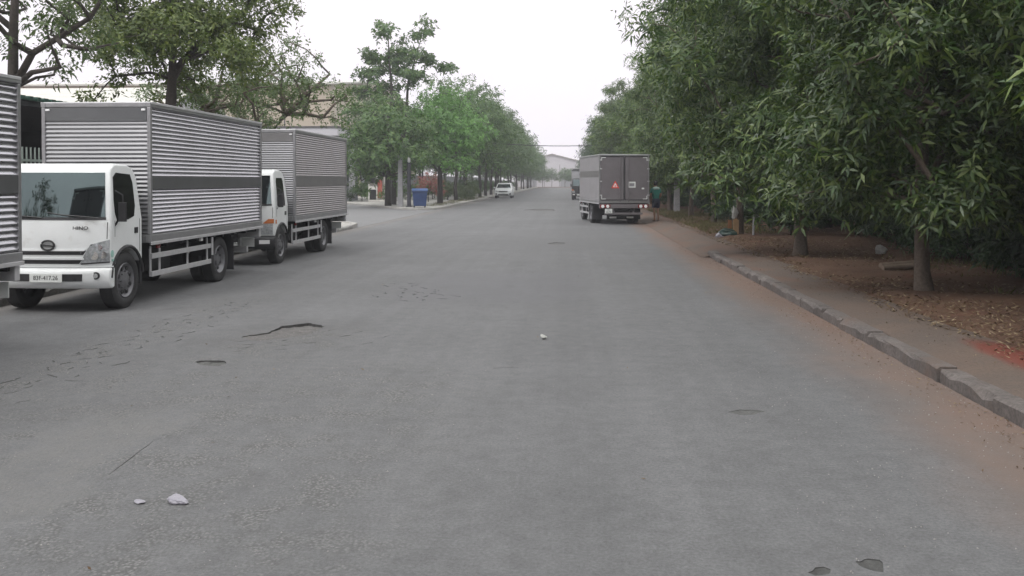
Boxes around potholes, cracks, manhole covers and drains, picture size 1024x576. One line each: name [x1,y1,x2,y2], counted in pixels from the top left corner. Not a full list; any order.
crack [0,300,263,404]
pothole [855,559,884,572]
crack [378,283,461,301]
pothole [808,567,831,576]
